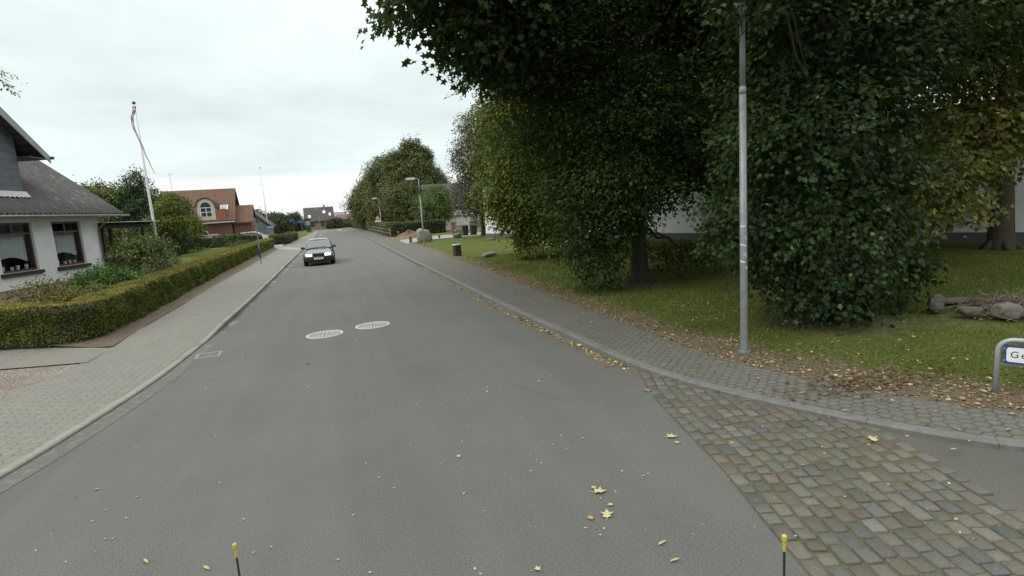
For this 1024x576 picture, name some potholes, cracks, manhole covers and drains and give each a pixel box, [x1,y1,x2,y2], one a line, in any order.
manhole cover [355,321,390,329]
manhole cover [306,330,343,339]
crack [492,371,590,408]
